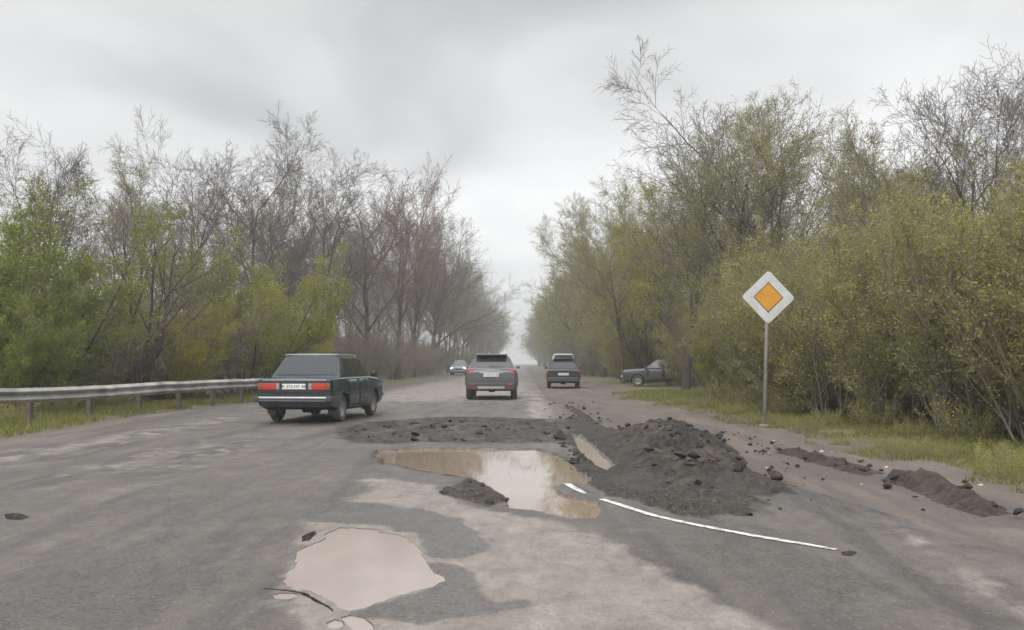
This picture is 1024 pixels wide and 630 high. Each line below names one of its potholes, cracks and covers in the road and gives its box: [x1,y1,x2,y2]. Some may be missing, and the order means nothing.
pothole [571,433,617,470]
pothole [373,447,604,519]
crack [262,588,334,612]
pothole [283,527,446,611]
pothole [326,619,345,629]
pothole [340,615,374,630]
